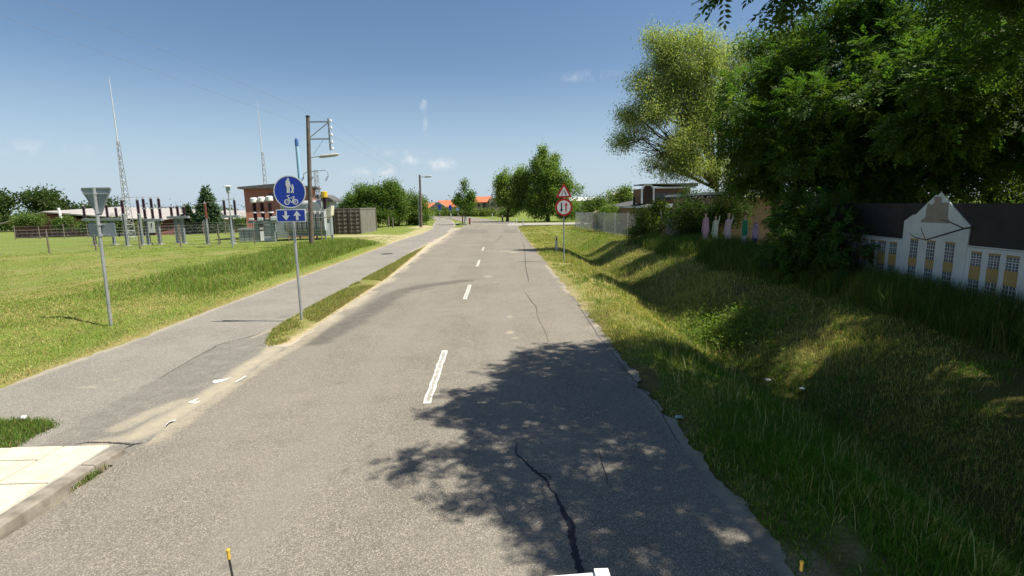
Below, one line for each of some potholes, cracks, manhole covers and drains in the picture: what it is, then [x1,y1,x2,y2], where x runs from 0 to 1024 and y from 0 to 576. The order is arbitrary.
crack [521,234,548,339]
crack [579,306,680,485]
